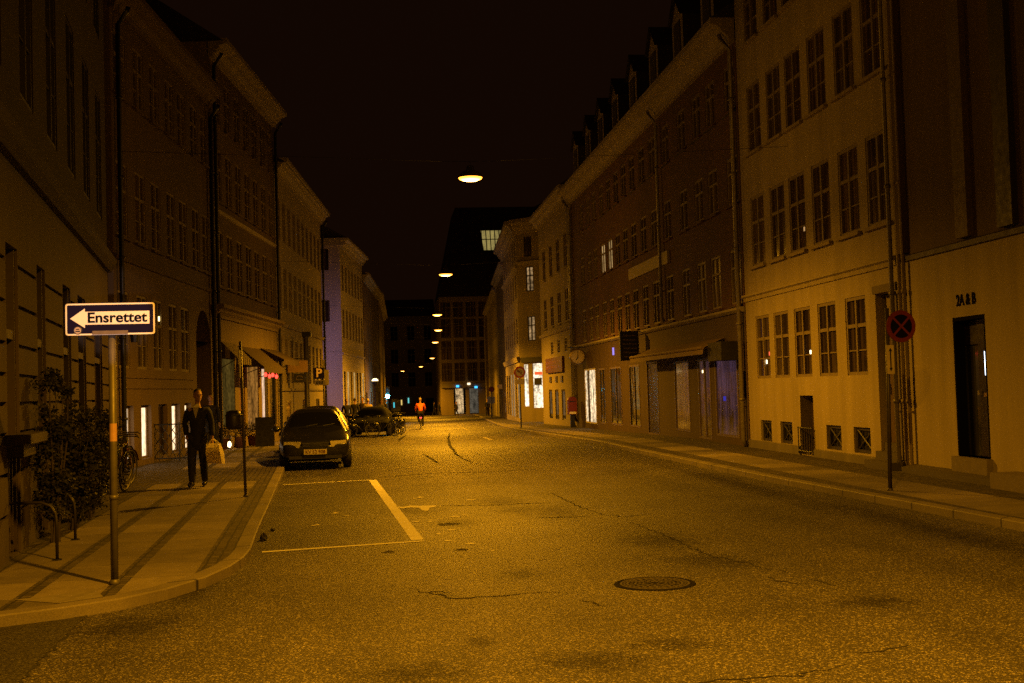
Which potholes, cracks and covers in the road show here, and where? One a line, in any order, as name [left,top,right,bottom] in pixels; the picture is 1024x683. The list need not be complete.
crack [415,588,600,606]
crack [380,434,531,478]
crack [699,645,908,683]
manhole cover [614,577,696,591]
